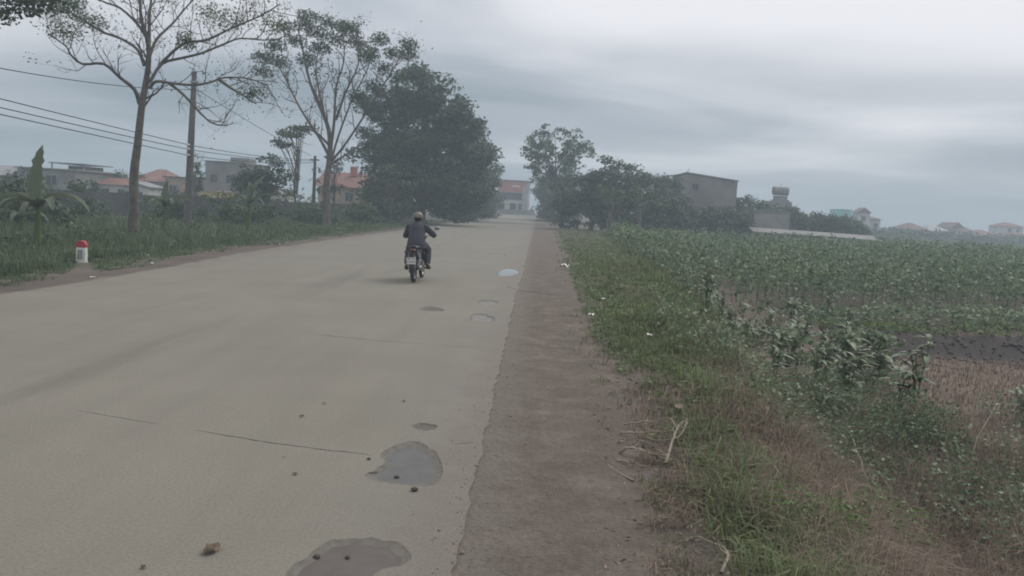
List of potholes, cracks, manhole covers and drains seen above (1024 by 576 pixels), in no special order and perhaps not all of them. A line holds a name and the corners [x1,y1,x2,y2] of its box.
crack [78,410,465,455]
pothole [410,423,438,431]
pothole [364,441,443,487]
pothole [496,268,520,276]
pothole [285,537,411,576]
pothole [469,313,495,322]
